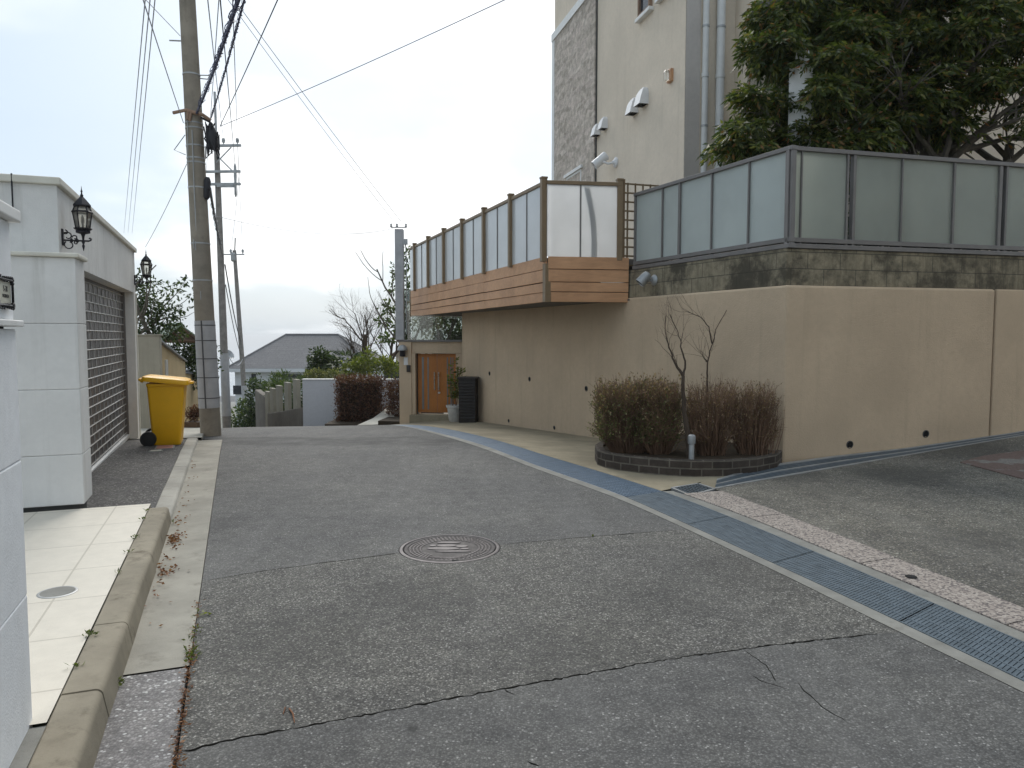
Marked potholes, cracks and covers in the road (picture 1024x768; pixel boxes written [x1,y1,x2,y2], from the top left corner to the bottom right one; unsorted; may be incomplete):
drain grate [773,551,934,622]
drain grate [627,491,727,524]
drain grate [899,604,1024,681]
crack [184,634,876,752]
manhole cover [399,534,500,563]
drain grate [688,516,813,563]
drain grate [671,483,715,494]
